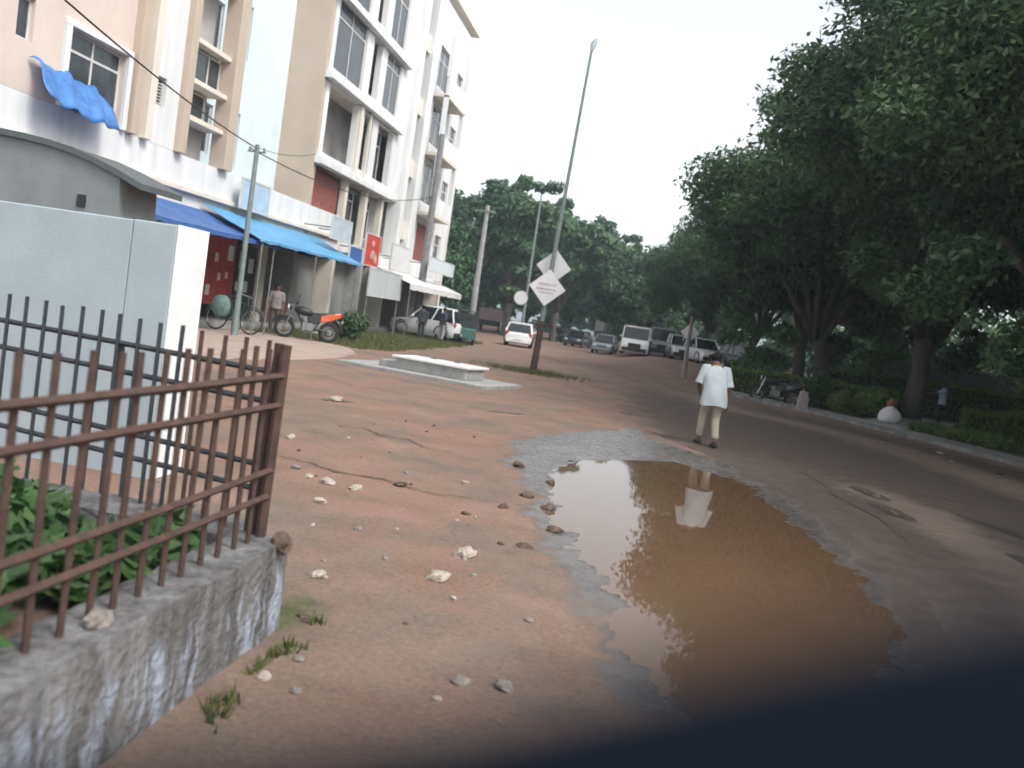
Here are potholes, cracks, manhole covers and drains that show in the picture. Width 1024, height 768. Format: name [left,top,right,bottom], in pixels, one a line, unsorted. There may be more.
crack [278,455,462,497]
crack [796,468,906,541]
pothole [489,419,931,685]
